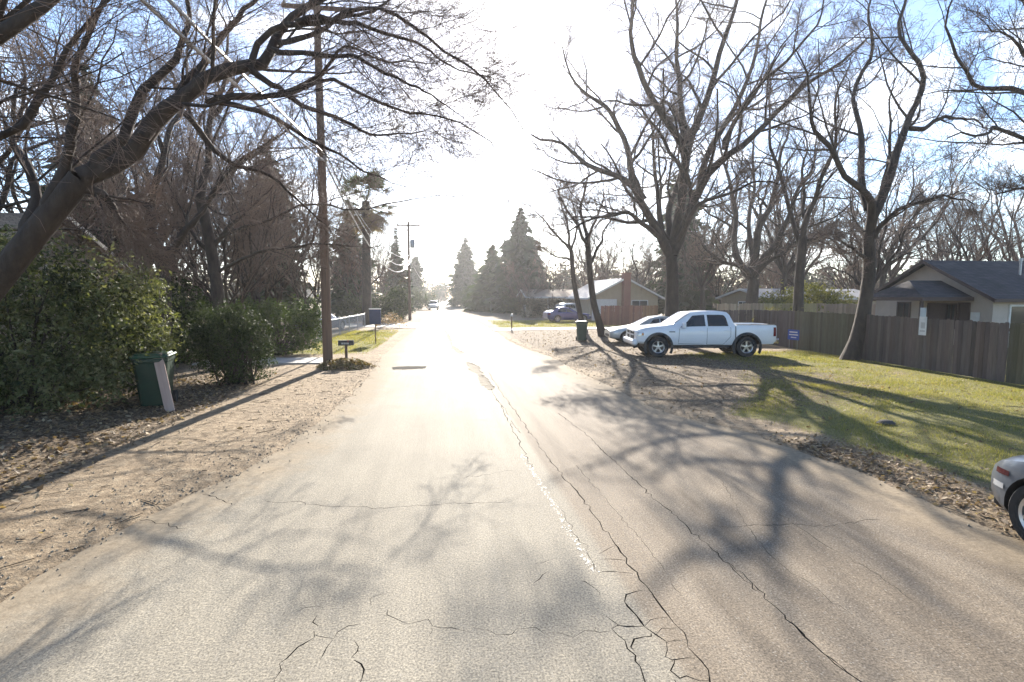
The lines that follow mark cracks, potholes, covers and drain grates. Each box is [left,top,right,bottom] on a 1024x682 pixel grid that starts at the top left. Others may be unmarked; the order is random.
crack [370,507,709,682]
crack [274,606,365,682]
crack [268,501,502,509]
crack [491,389,533,465]
crack [577,466,680,593]
crack [710,482,917,628]
